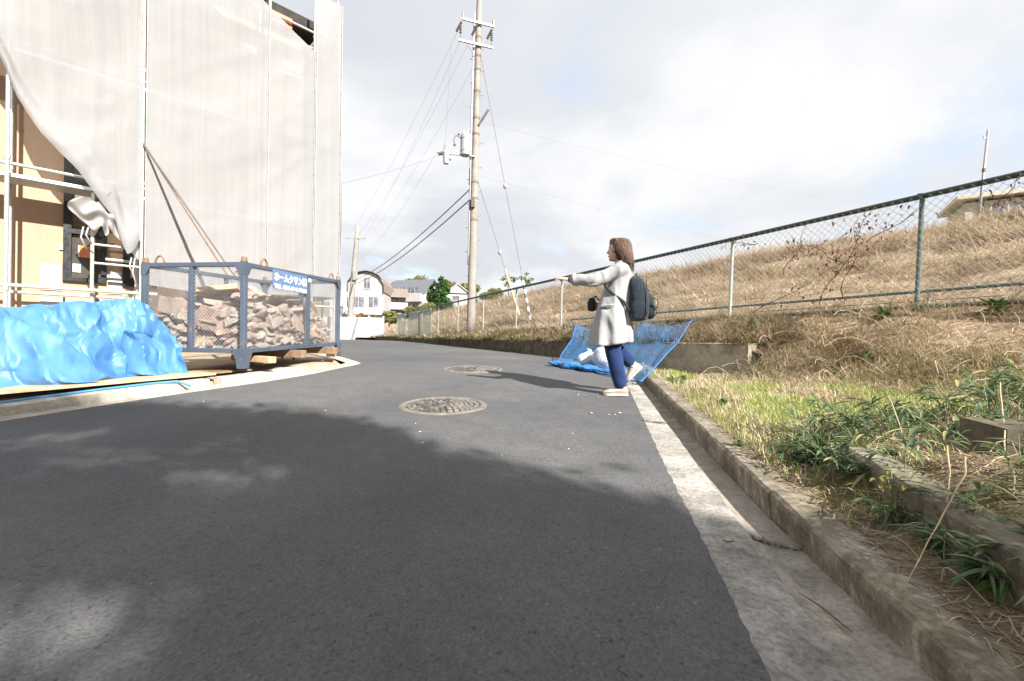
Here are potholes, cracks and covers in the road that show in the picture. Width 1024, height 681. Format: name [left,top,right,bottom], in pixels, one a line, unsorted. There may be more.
manhole cover [398,397,487,415]
